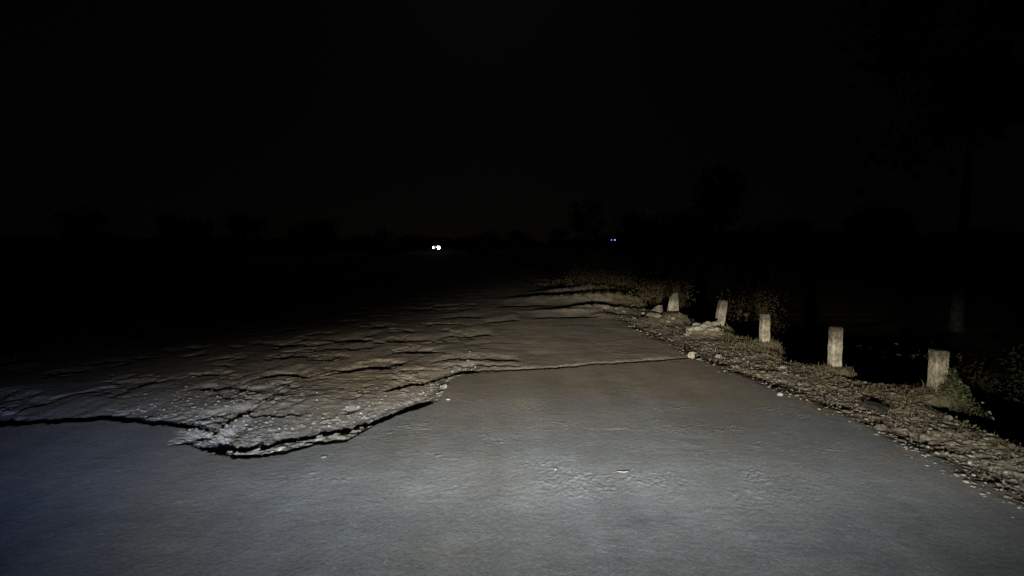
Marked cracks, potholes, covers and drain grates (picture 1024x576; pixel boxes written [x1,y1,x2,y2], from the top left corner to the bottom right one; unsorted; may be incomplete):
crack [473,355,688,373]
